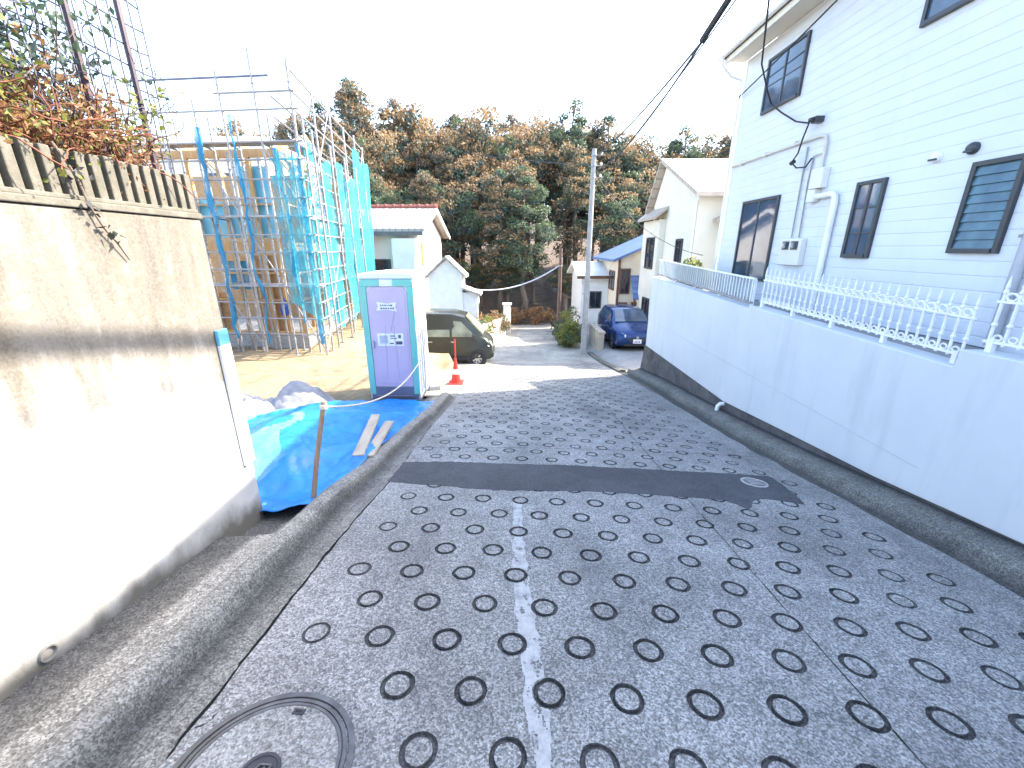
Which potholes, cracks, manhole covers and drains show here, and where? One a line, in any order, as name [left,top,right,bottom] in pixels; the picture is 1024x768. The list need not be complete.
manhole cover [740,477,769,488]
manhole cover [160,683,368,768]
